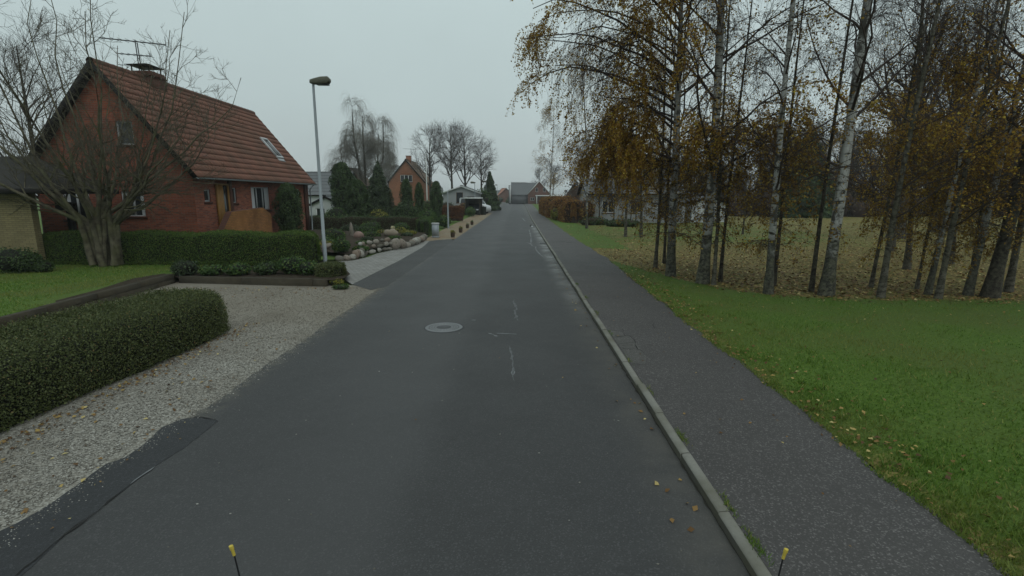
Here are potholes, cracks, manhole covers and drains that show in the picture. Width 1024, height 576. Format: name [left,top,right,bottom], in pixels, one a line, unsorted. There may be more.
manhole cover [424,322,464,333]
